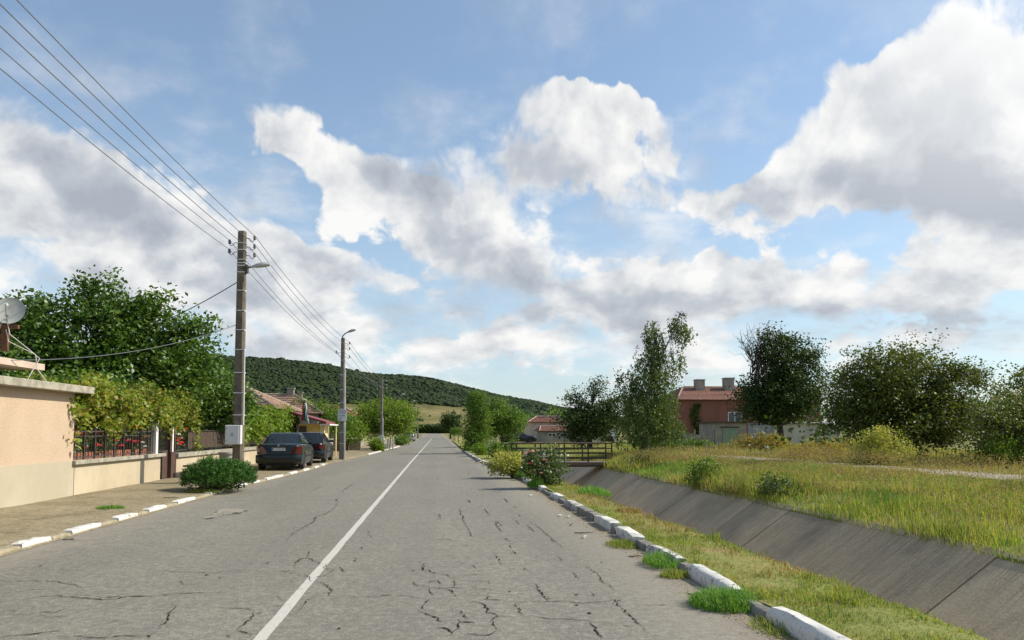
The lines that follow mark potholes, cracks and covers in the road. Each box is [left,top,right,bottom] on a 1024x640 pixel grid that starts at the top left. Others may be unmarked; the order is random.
crack [3,484,648,638]
